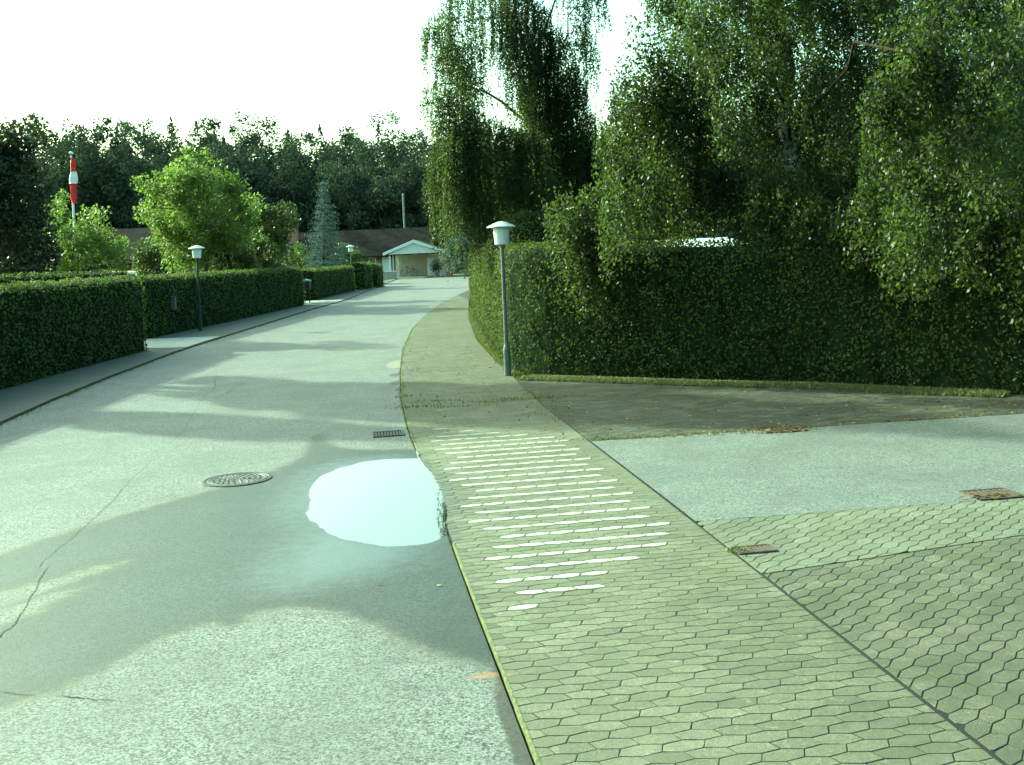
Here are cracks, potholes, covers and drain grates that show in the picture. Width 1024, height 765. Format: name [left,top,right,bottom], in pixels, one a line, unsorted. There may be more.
manhole cover [201,472,272,487]
drain grate [730,543,778,556]
crack [0,462,150,637]
drain grate [959,487,1024,501]
drain grate [372,430,405,438]
